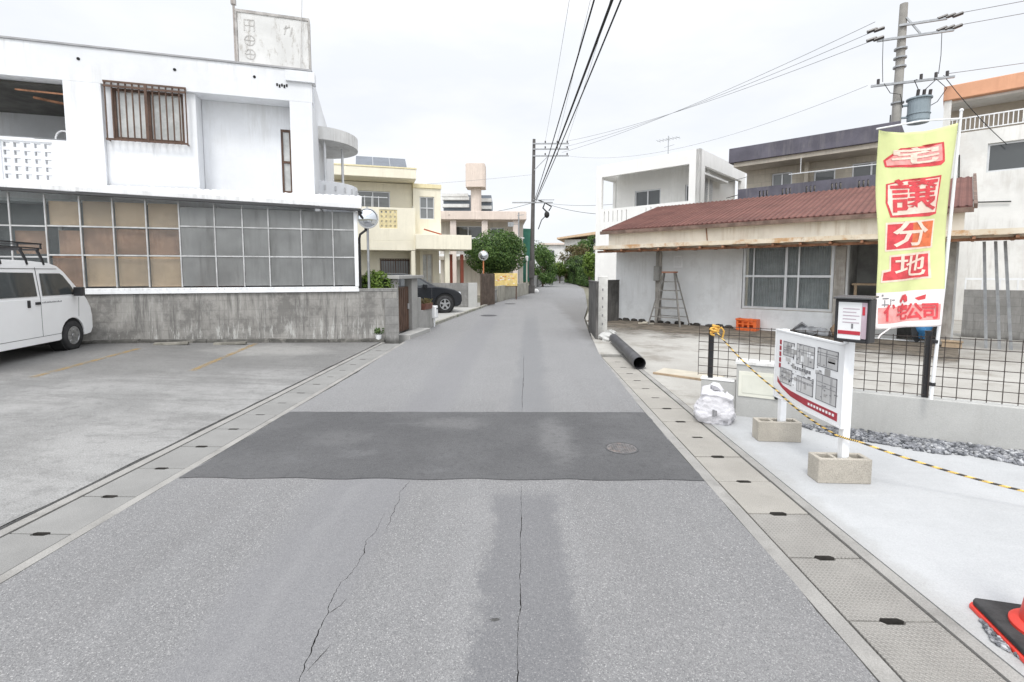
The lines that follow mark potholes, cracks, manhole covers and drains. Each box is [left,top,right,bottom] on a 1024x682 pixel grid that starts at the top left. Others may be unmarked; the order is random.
manhole cover [605,442,639,454]
crack [299,518,382,681]
